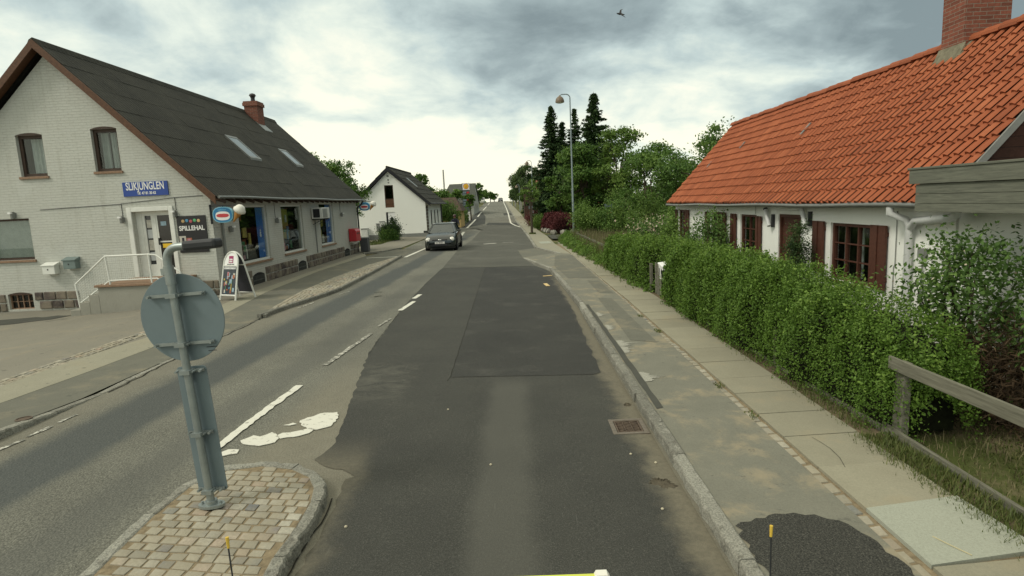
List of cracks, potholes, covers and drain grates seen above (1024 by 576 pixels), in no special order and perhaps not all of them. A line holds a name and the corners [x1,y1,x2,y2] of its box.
drain grate [608,418,650,434]
pothole [638,469,685,494]
